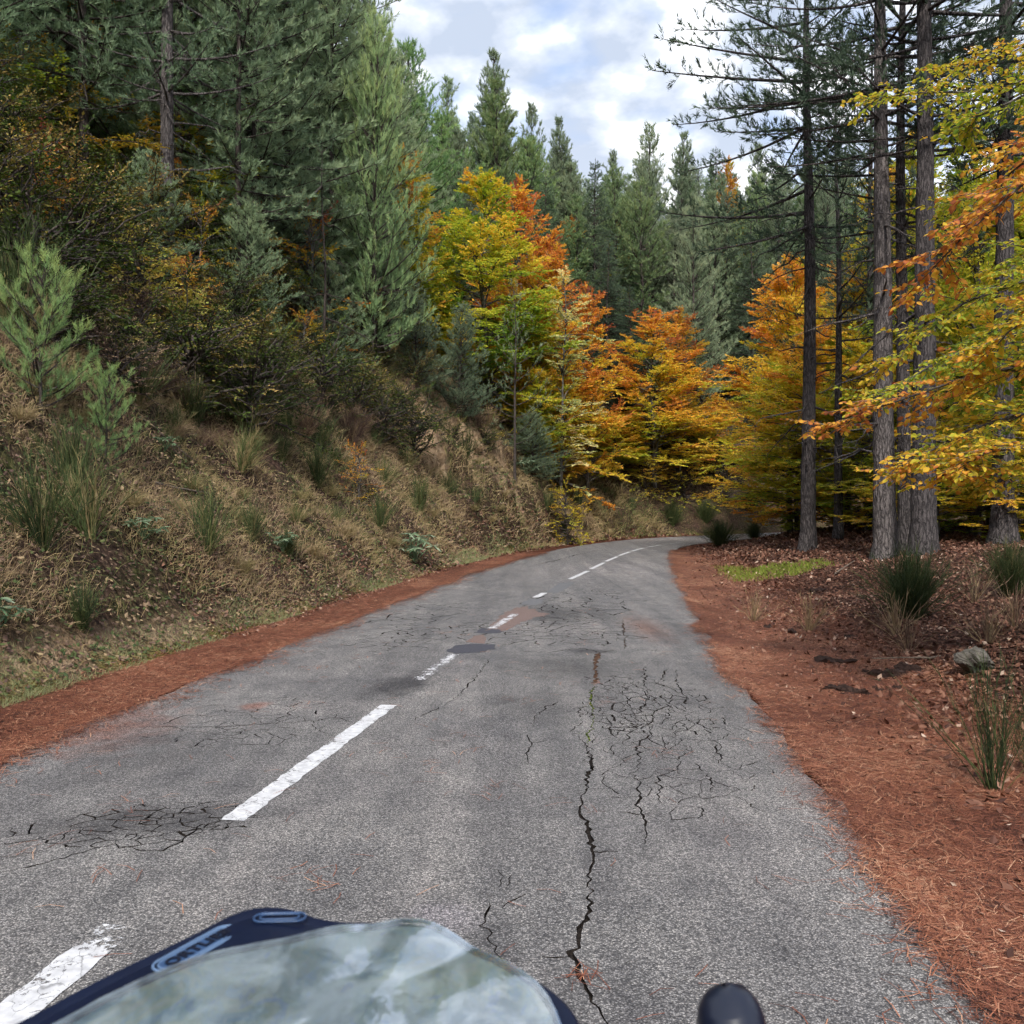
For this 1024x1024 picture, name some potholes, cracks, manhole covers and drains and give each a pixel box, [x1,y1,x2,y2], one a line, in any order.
crack [479,869,526,960]
crack [519,702,558,765]
crack [411,660,489,721]
crack [347,590,648,653]
crack [2,801,263,872]
crack [124,696,357,750]
crack [542,668,775,1024]
